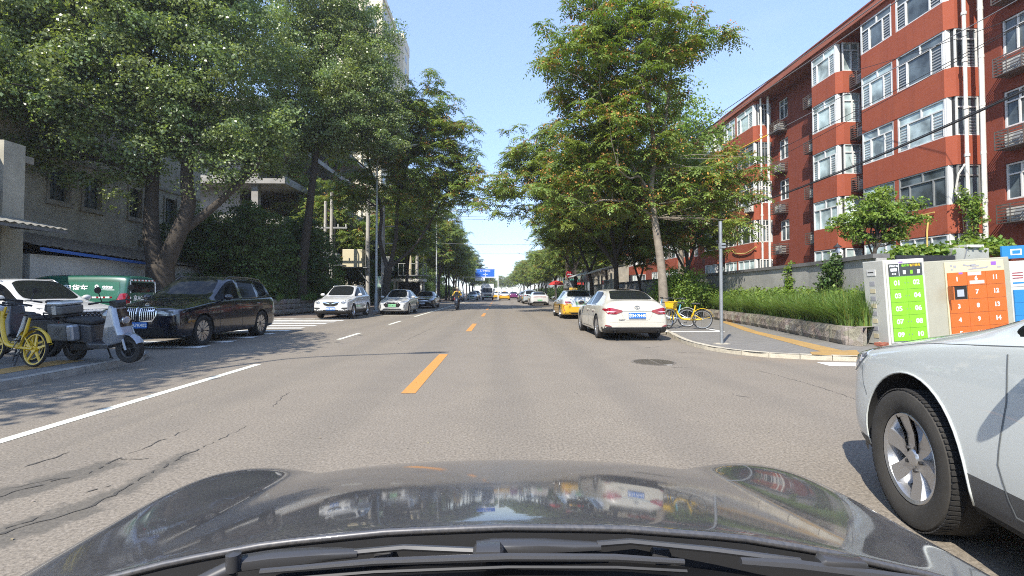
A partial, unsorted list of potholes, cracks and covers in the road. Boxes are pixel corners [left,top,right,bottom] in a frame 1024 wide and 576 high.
crack [0,428,242,534]
